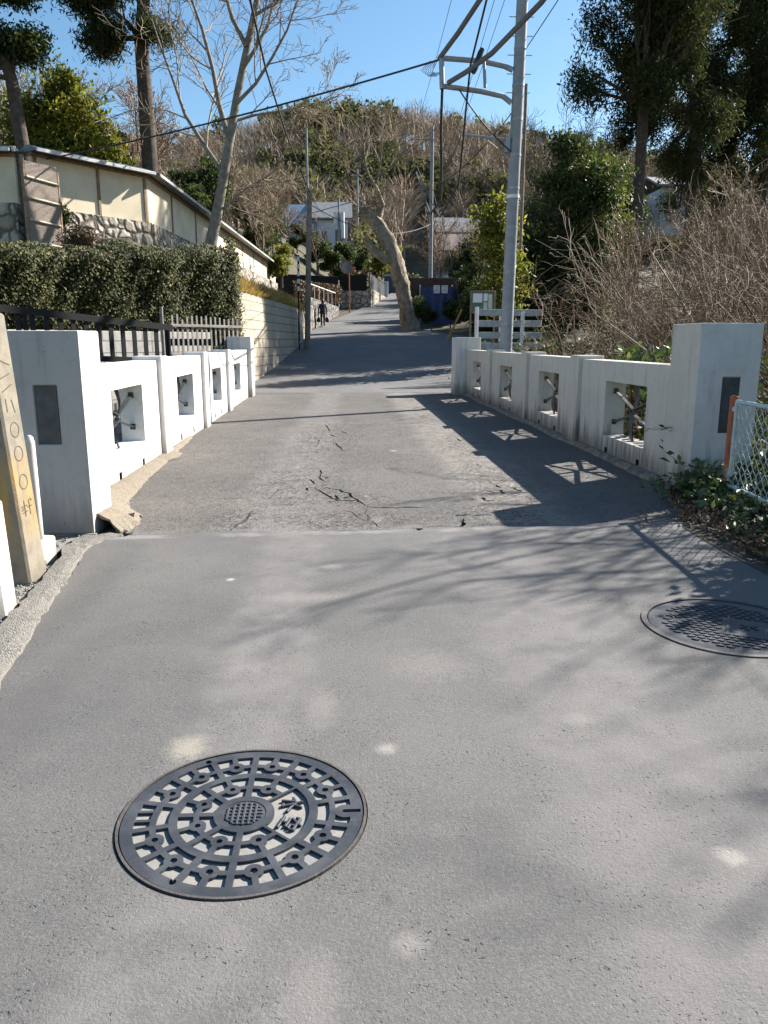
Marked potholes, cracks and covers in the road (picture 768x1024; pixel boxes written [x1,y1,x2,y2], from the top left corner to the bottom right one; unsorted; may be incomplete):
crack [220,470,521,532]
manhole cover [115,749,367,902]
manhole cover [641,597,768,659]
